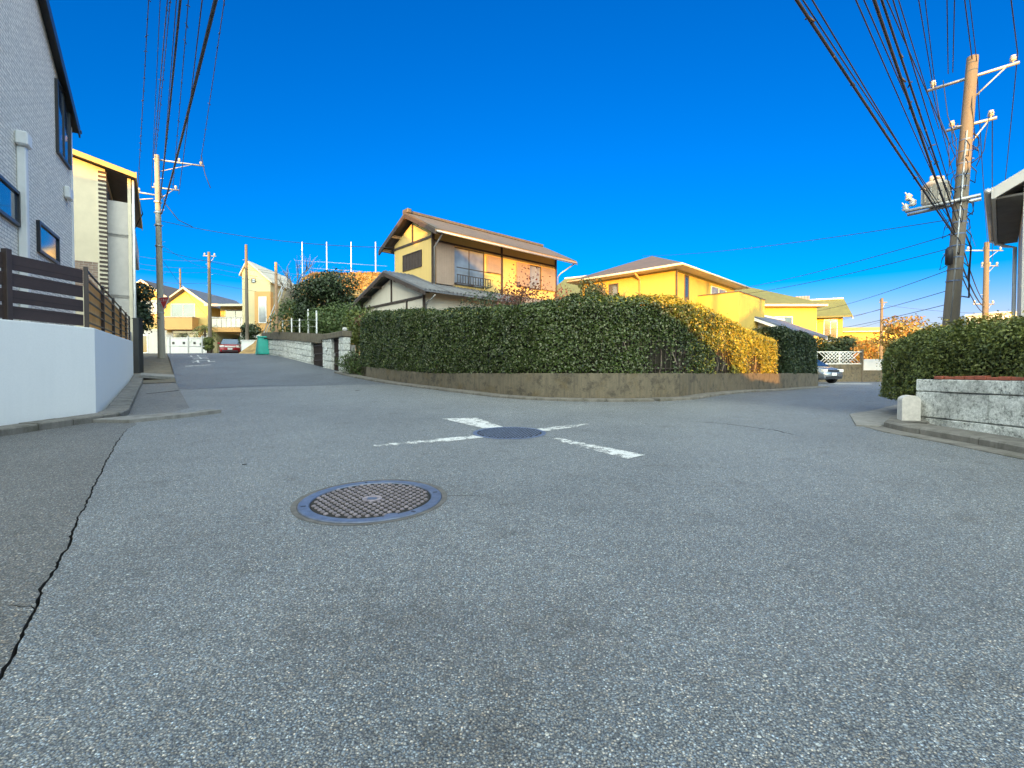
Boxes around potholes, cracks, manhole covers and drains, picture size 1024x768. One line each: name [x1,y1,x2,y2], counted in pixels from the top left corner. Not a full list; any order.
manhole cover [290,479,447,526]
manhole cover [473,427,546,439]
crack [0,429,127,680]
